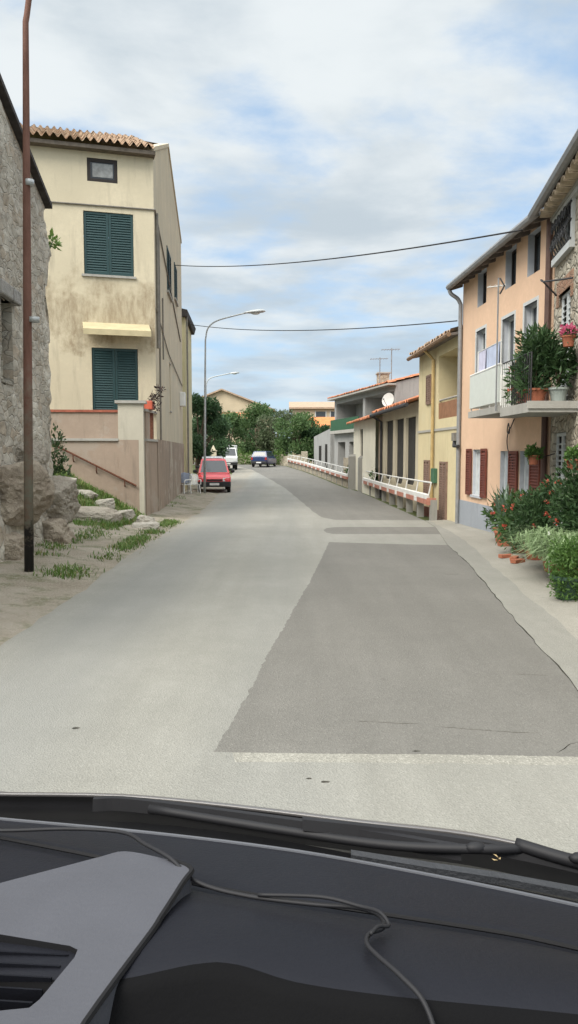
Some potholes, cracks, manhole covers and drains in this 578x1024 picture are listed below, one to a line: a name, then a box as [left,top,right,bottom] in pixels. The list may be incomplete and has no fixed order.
crack [360,721,527,733]
